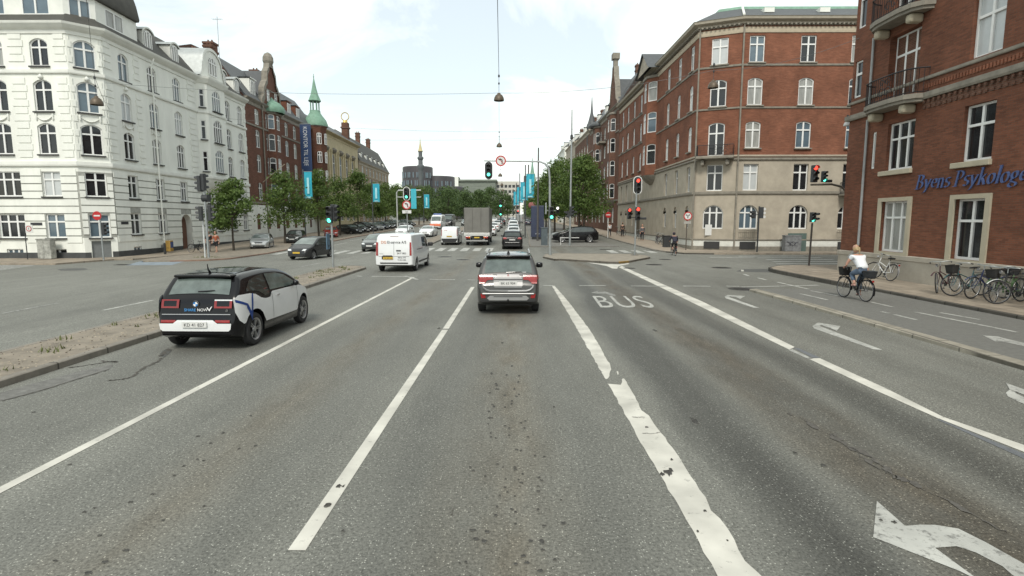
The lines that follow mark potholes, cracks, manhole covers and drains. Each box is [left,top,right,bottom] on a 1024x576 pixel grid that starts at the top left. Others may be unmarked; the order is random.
crack [788,412,1006,531]
crack [69,349,171,381]
